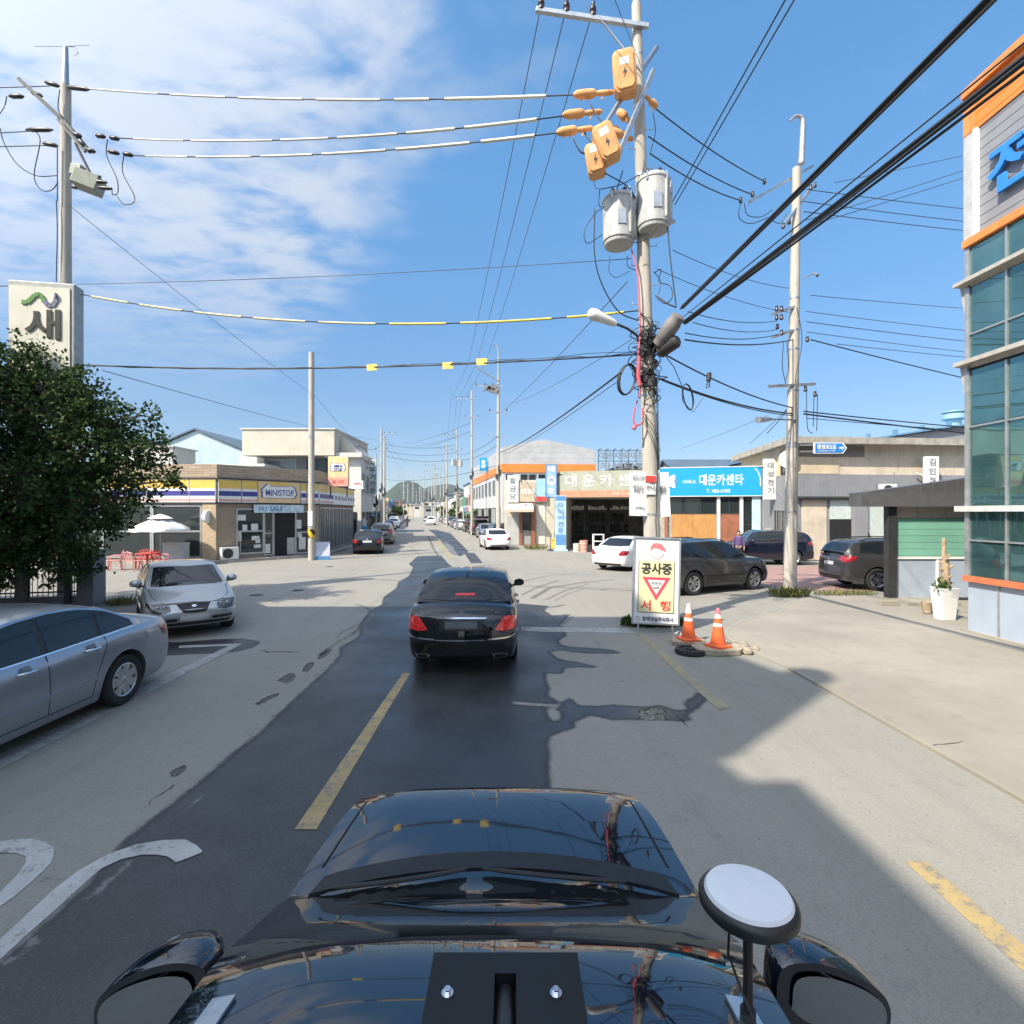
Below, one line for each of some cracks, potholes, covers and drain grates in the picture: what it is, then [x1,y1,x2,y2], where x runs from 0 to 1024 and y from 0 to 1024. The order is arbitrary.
pothole [622,702,682,727]
